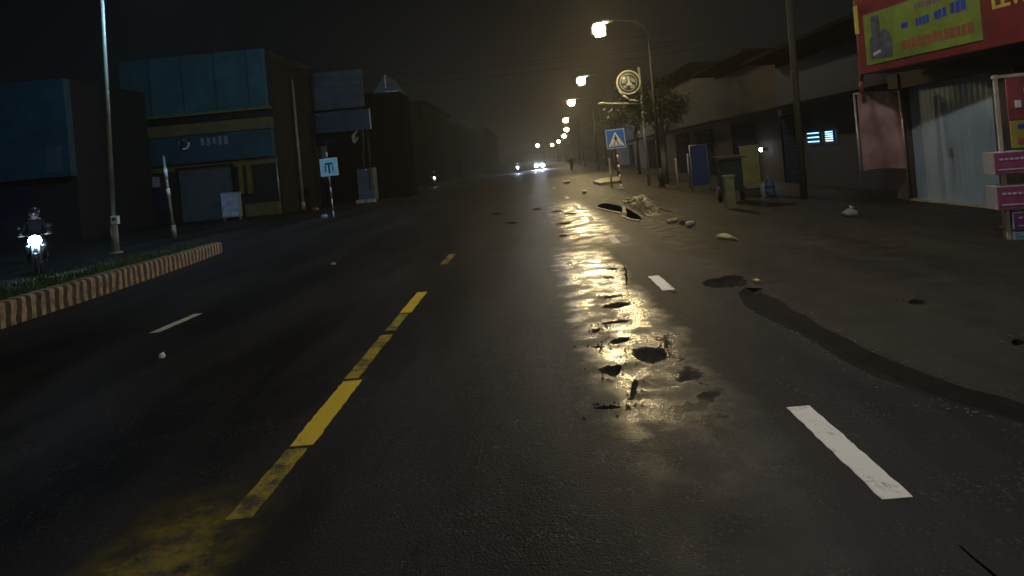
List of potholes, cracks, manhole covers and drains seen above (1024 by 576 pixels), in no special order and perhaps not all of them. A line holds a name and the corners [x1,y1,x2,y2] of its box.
pothole [632,347,668,364]
pothole [630,379,639,401]
pothole [702,275,747,288]
pothole [598,365,622,376]
